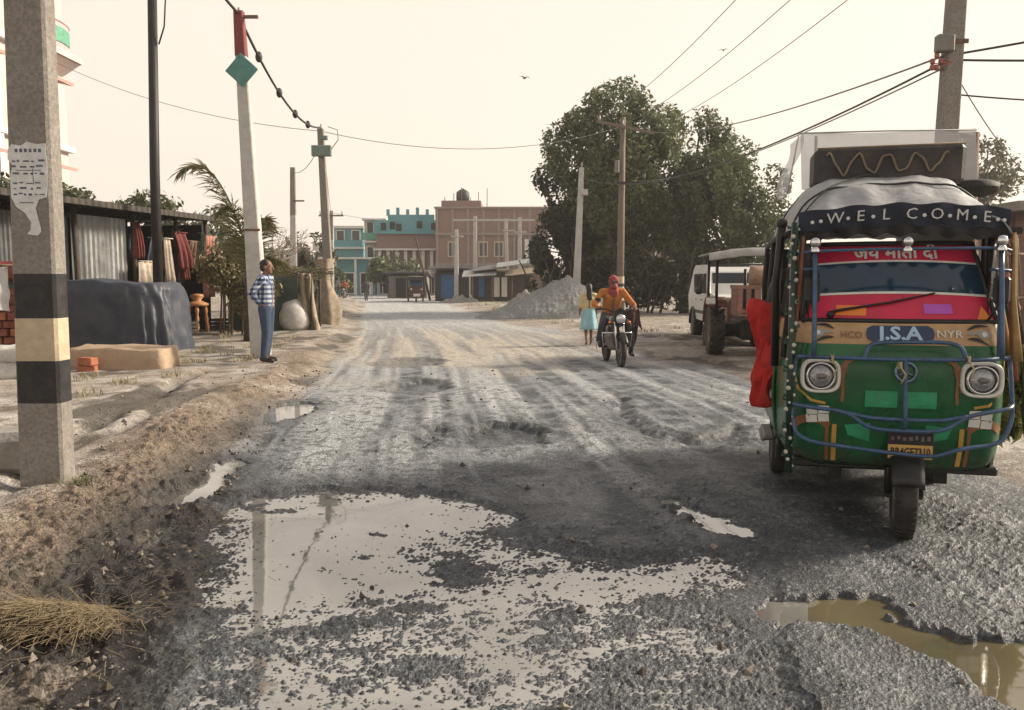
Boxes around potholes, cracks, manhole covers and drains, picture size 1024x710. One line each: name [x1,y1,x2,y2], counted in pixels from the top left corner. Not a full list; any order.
pothole [166,484,824,710]
pothole [456,420,552,449]
pothole [752,586,1024,710]
pothole [605,397,756,451]
pothole [249,400,325,426]
pothole [142,458,251,509]
